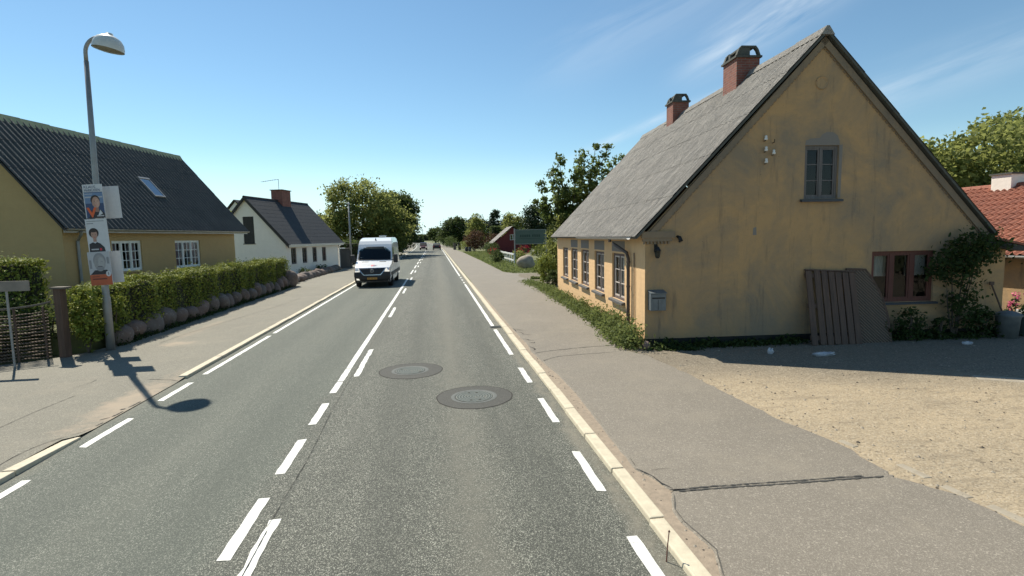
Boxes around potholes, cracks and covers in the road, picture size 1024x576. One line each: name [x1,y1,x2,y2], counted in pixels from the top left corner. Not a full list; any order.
manhole cover [436,386,513,409]
manhole cover [379,363,443,379]
crack [631,459,883,575]
